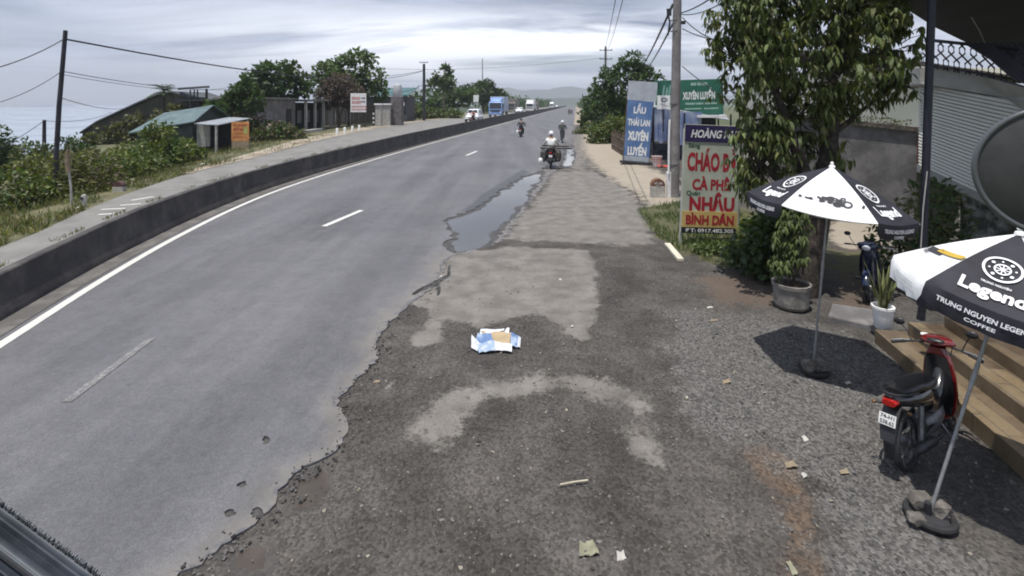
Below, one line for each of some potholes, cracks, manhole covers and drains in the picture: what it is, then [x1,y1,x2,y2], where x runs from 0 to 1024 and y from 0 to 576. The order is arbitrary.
pothole [559,145,577,168]
pothole [442,170,546,253]
crack [412,266,450,296]
